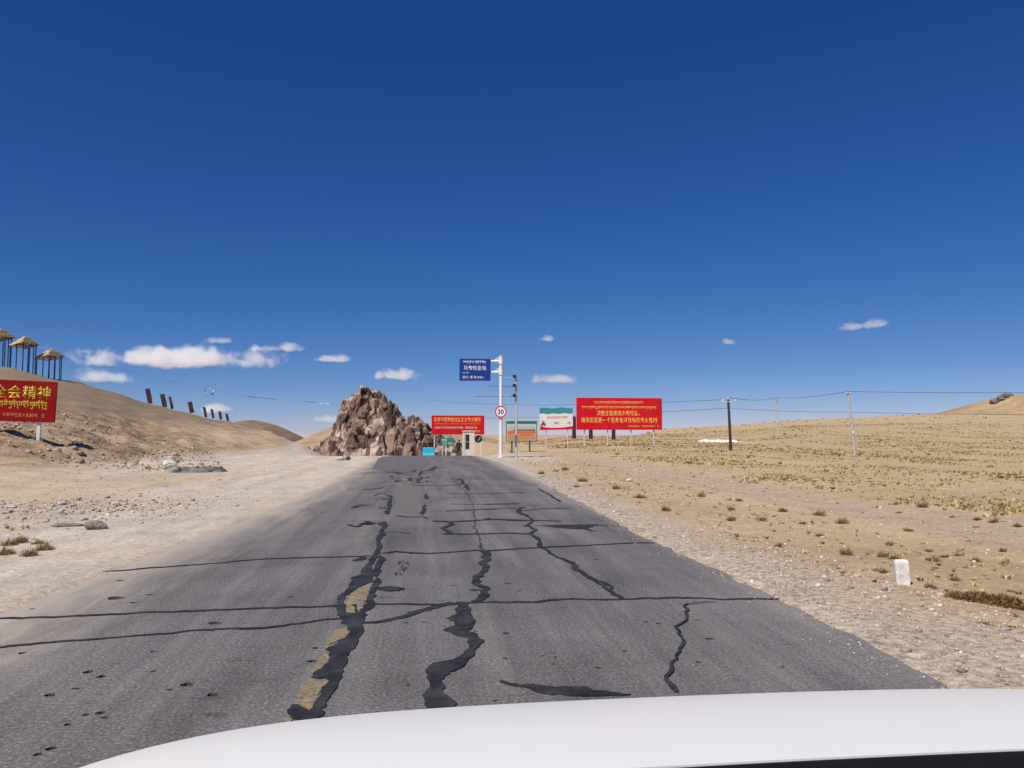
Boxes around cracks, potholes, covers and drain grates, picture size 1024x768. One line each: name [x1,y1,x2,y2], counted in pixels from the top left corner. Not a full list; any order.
crack [350,466,557,550]
